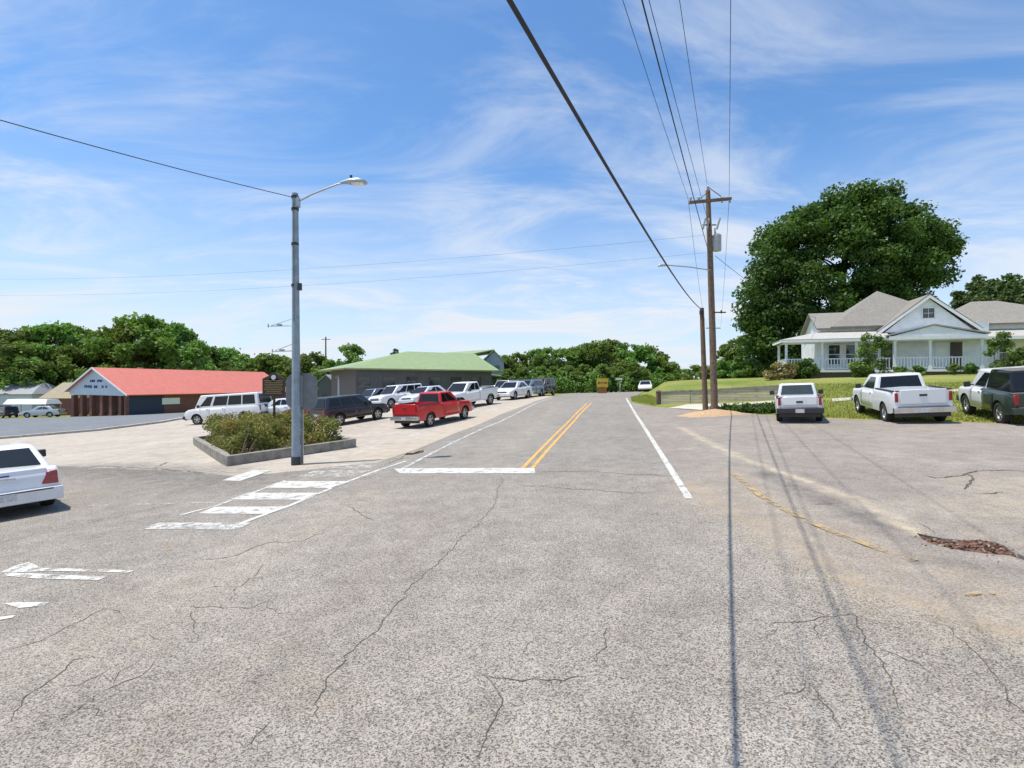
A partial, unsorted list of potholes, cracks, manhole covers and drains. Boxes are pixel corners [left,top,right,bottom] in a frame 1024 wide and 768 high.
crack [6,656,159,727]
crack [925,619,1024,712]
crack [469,624,610,765]
crack [154,532,324,637]
crack [767,680,850,738]
crack [929,470,1020,493]
crack [764,604,940,720]
crack [314,481,503,718]
pothole [915,533,1024,562]
